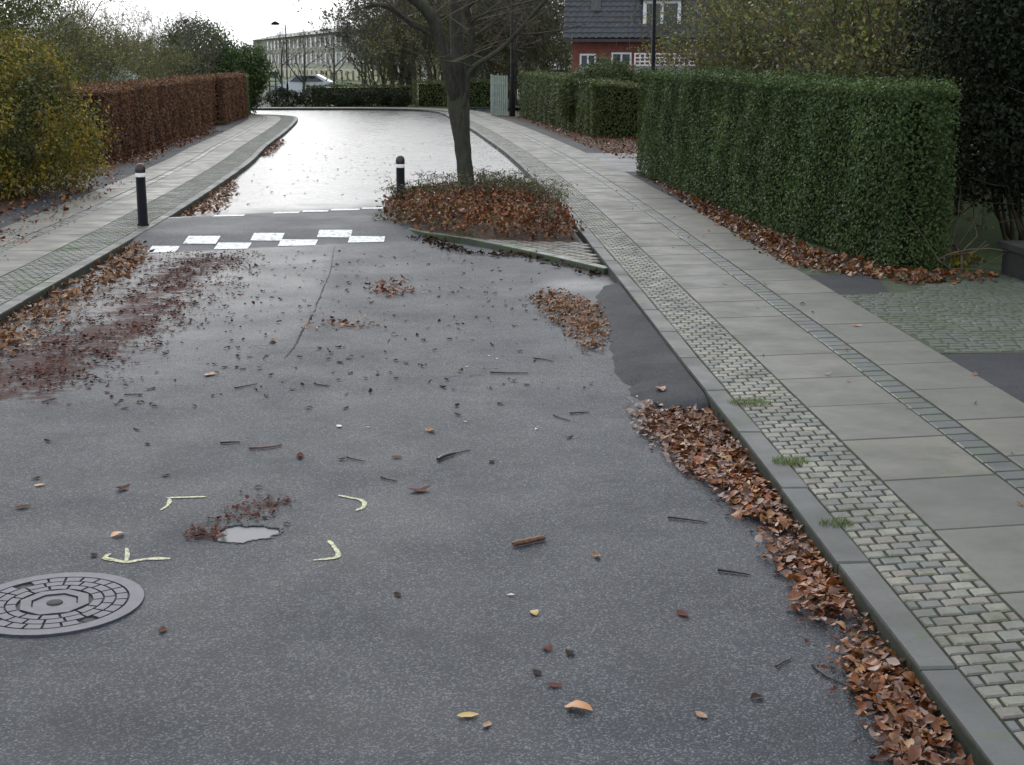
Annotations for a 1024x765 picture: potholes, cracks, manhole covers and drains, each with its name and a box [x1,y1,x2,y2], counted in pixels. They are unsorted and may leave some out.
crack [285,247,335,357]
manhole cover [0,572,144,637]
pothole [212,523,284,544]
